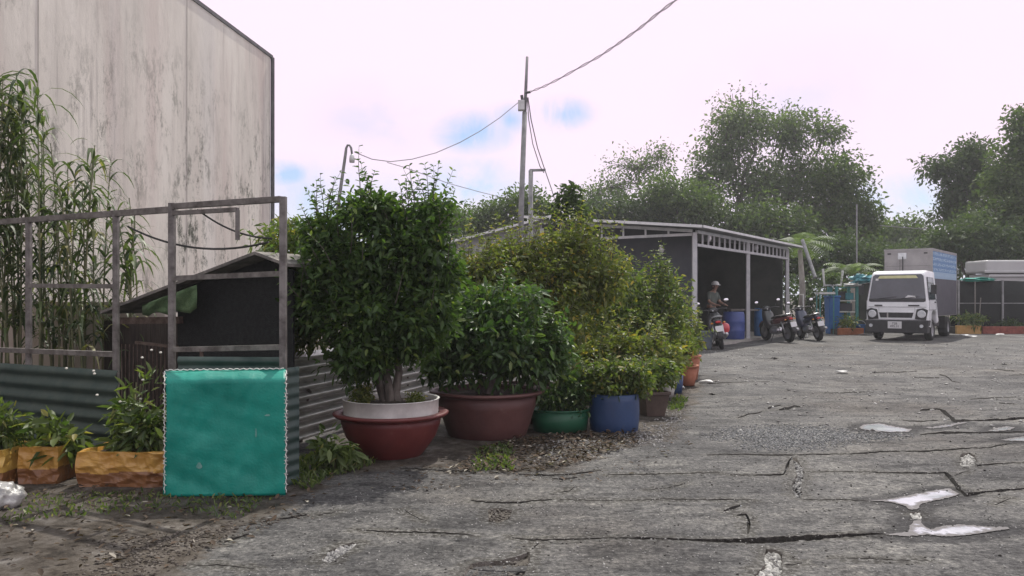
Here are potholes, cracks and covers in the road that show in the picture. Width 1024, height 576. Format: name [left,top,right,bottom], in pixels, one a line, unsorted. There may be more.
crack [471,470,751,534]
crack [735,457,792,476]
crack [738,405,801,418]
pothole [488,508,512,523]
pothole [960,453,977,468]
pothole [754,549,783,576]
crack [821,371,1024,505]
